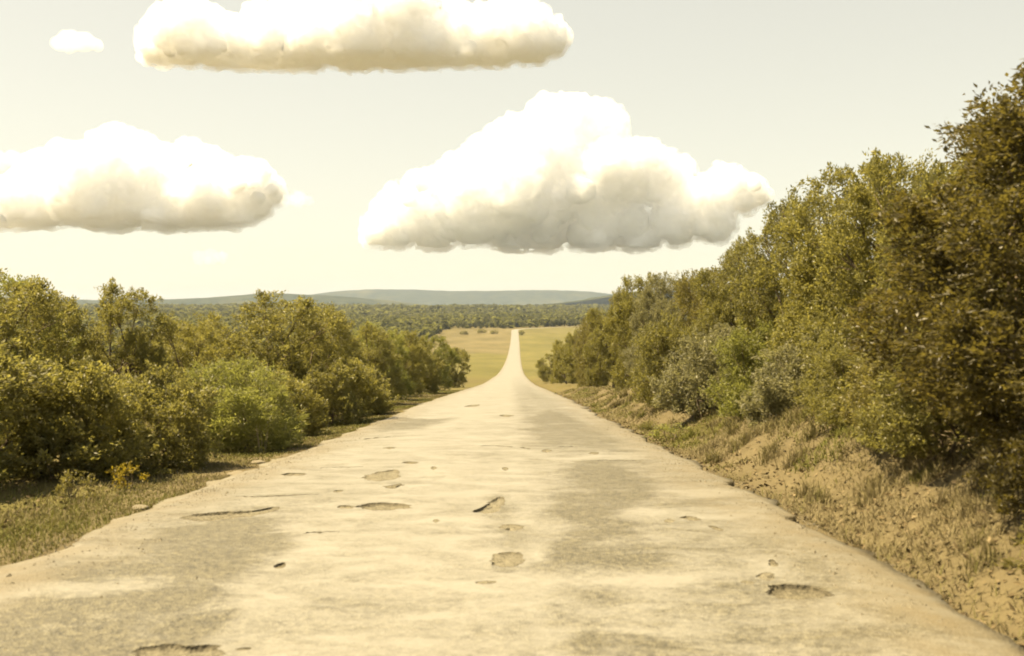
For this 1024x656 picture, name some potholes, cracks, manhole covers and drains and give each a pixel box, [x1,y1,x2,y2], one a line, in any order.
pothole [362,470,401,481]
pothole [132,643,227,656]
pothole [766,584,835,600]
pothole [180,507,280,521]
pothole [356,502,412,511]
pothole [473,497,505,514]
pothole [490,552,525,568]
